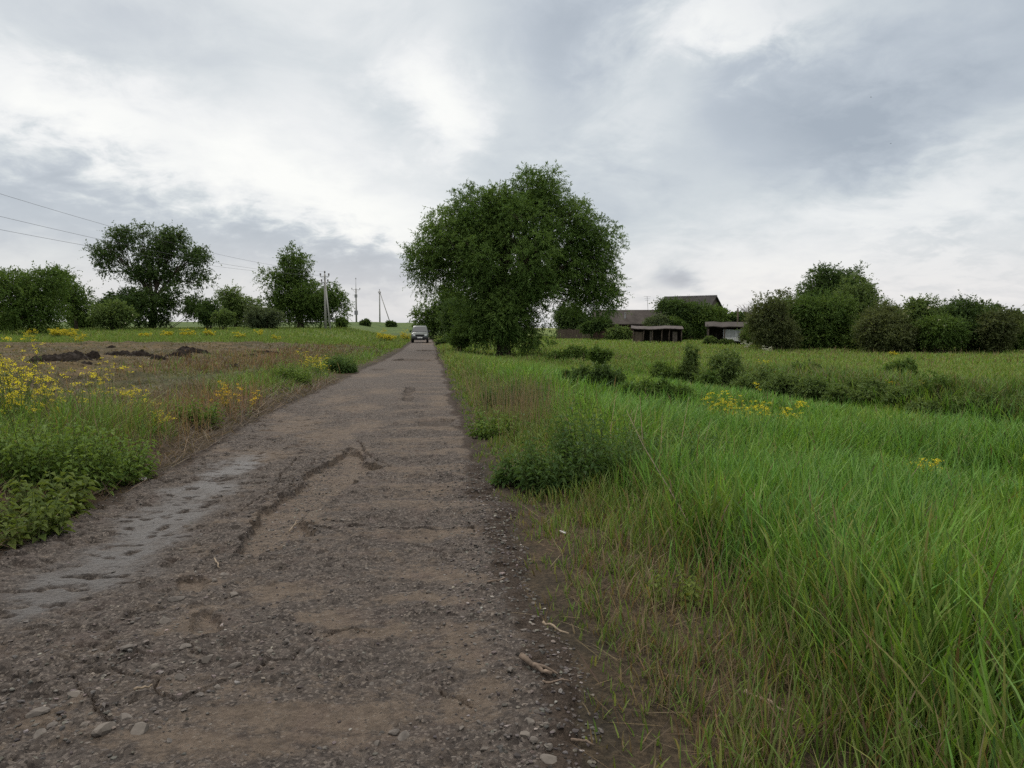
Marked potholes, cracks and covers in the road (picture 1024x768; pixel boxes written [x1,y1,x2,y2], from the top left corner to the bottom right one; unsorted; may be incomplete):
pothole [173,575,211,593]
crack [237,440,392,511]
pothole [187,609,225,635]
